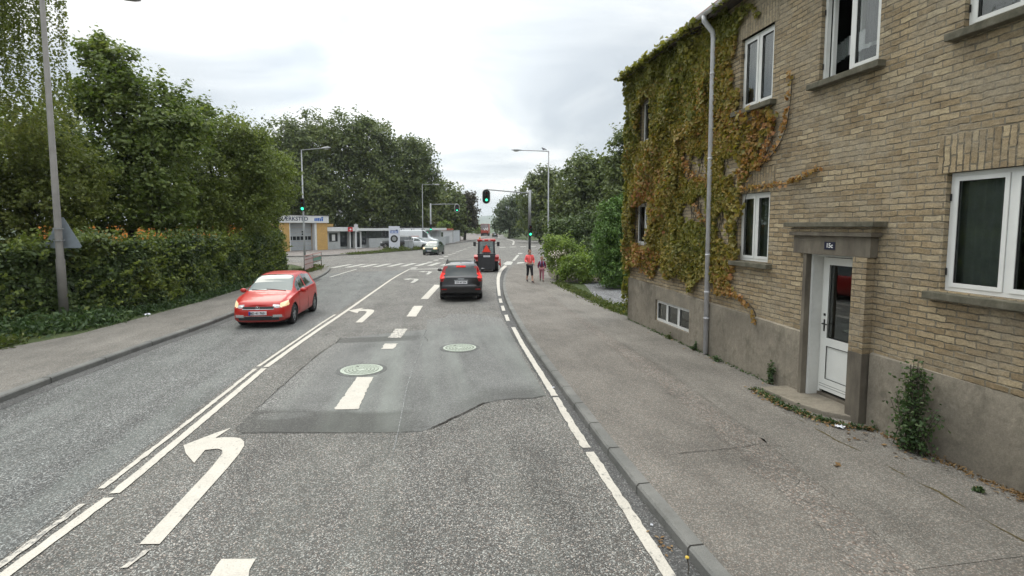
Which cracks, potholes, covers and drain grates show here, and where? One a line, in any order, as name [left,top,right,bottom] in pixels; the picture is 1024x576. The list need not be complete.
manhole cover [440,343,480,353]
manhole cover [336,363,387,377]
